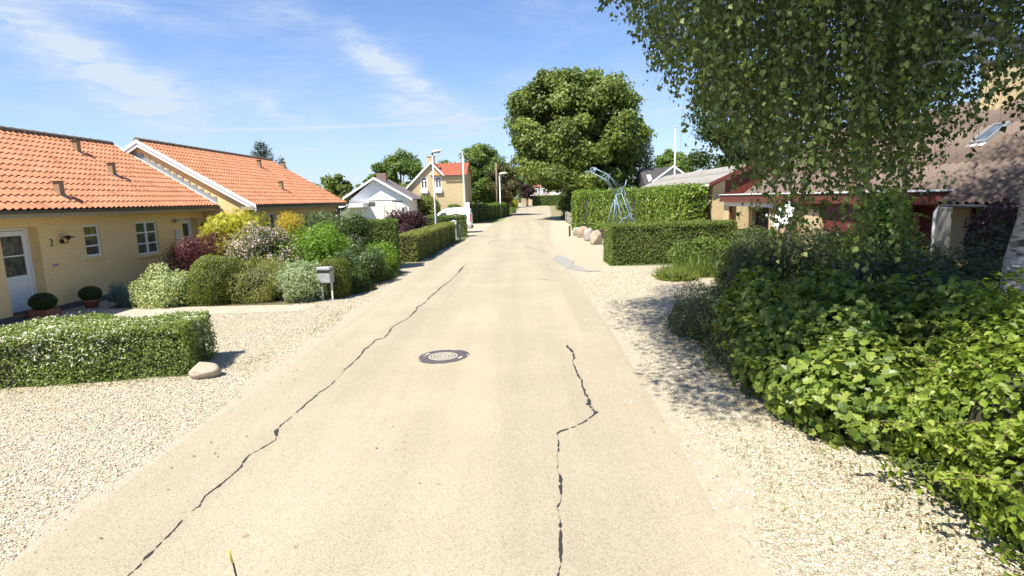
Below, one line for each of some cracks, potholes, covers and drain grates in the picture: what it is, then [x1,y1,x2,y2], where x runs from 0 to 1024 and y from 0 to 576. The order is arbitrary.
crack [127,267,463,576]
crack [556,345,598,576]
manhole cover [419,350,469,364]
